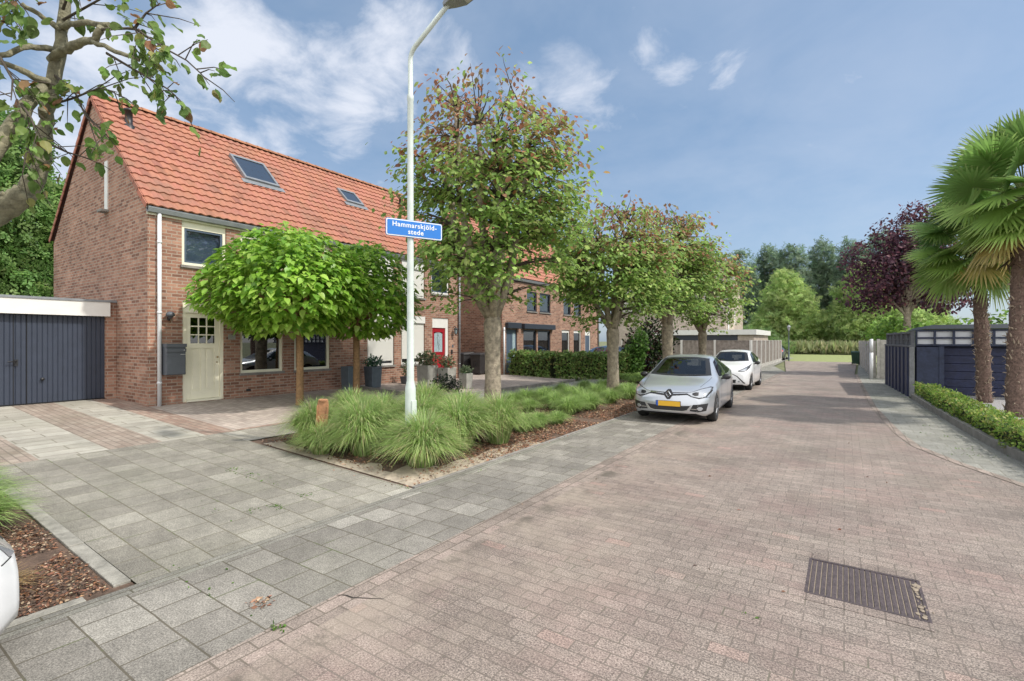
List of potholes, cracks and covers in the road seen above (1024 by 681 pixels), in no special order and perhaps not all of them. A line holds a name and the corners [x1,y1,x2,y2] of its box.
drain grate [804,558,934,624]
